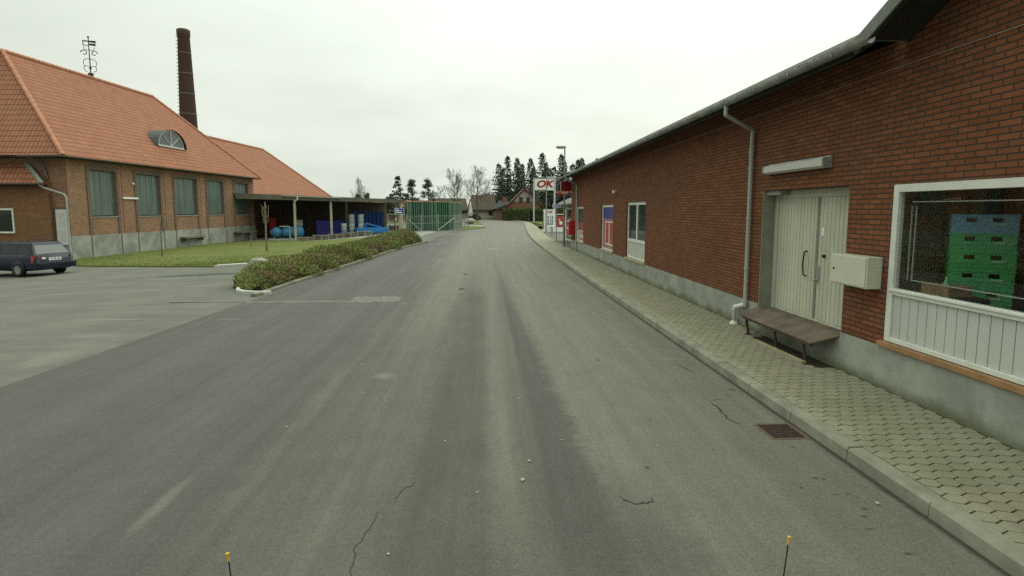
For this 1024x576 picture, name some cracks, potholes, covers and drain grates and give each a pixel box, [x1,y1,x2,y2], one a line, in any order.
drain grate [753,423,811,440]
crack [349,482,415,573]
